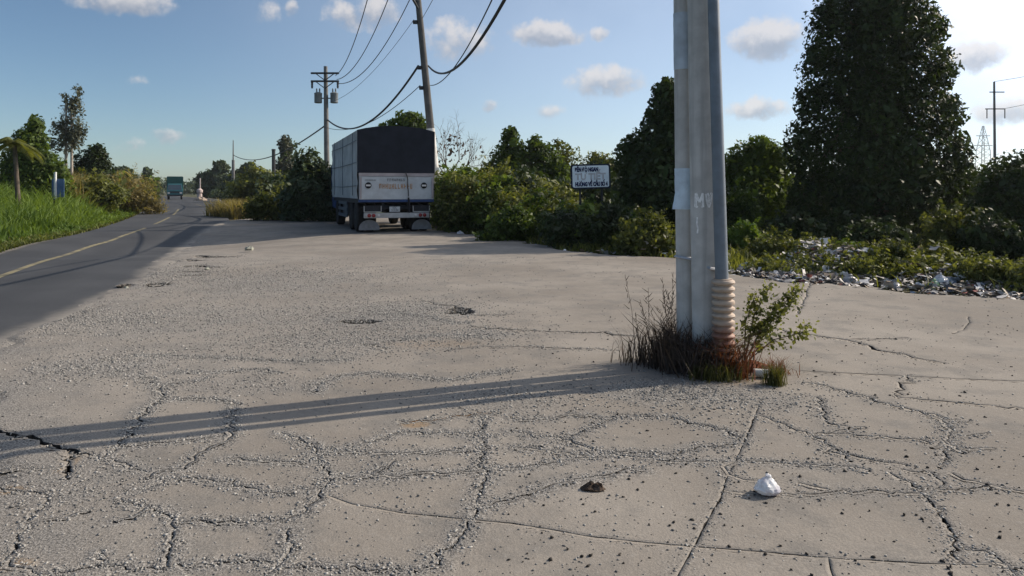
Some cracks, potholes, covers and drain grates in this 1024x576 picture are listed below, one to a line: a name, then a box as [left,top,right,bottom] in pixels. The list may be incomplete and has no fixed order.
crack [0,283,1024,576]
pothole [446,307,474,315]
